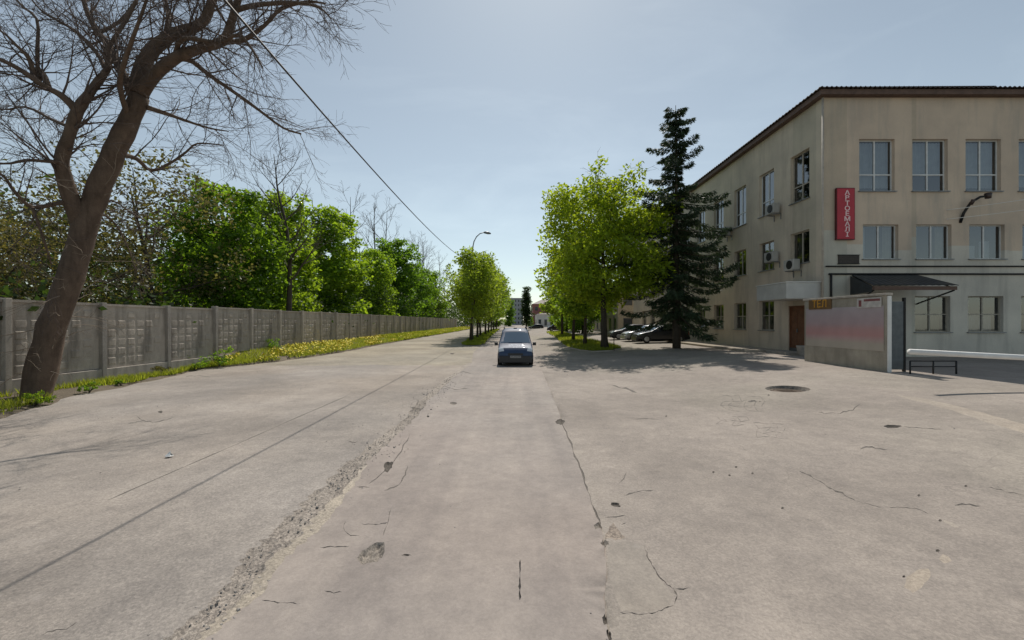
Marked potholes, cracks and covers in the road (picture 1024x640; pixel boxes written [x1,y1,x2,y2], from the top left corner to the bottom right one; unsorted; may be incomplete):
crack [717,395,788,439]
crack [955,487,1021,507]
pothole [357,542,385,564]
crack [359,434,410,491]
crack [800,471,928,514]
crack [620,547,686,615]
crack [320,510,391,548]
